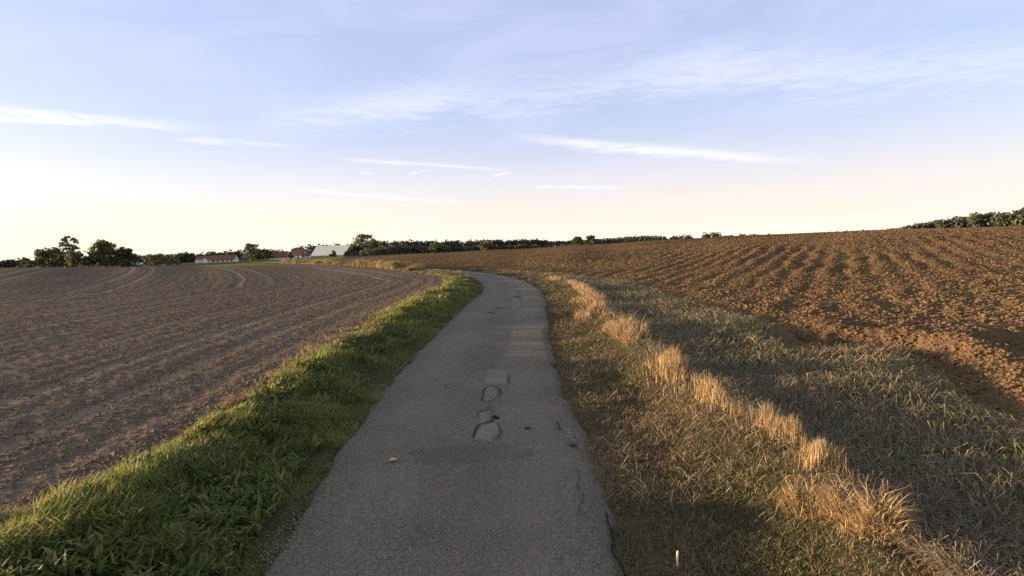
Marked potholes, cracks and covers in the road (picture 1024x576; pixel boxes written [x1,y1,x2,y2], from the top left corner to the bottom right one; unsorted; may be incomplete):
crack [605,509,627,576]
